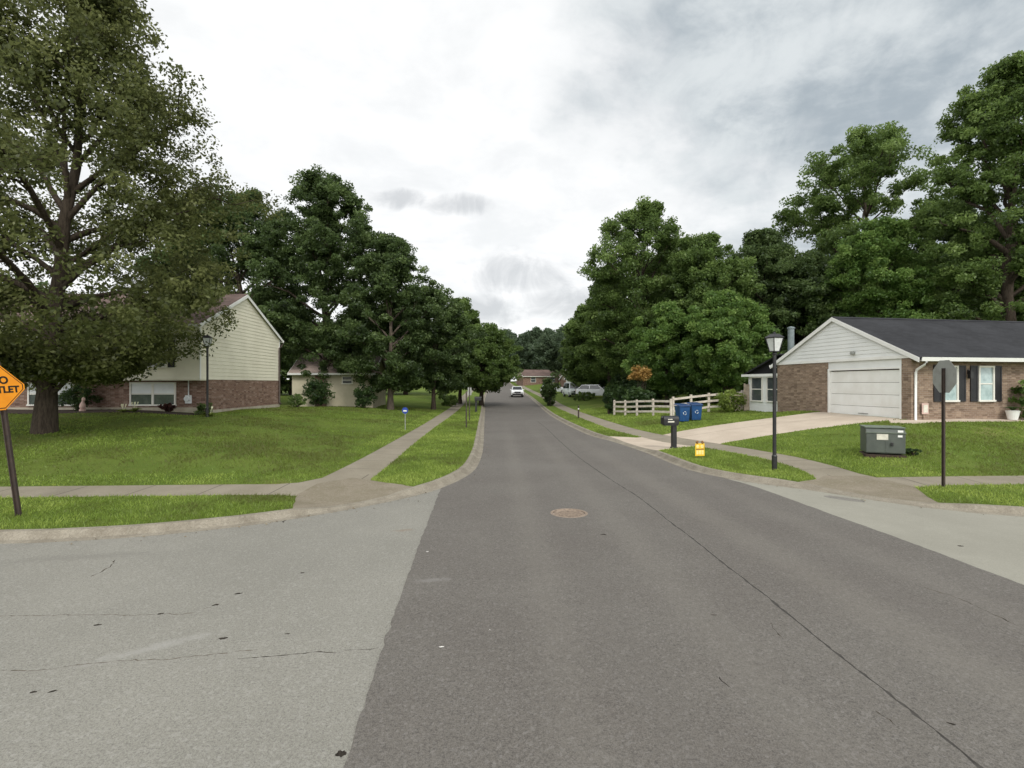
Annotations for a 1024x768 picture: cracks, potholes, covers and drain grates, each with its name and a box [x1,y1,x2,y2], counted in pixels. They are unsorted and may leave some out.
crack [3,648,374,671]
manhole cover [550,508,588,518]
